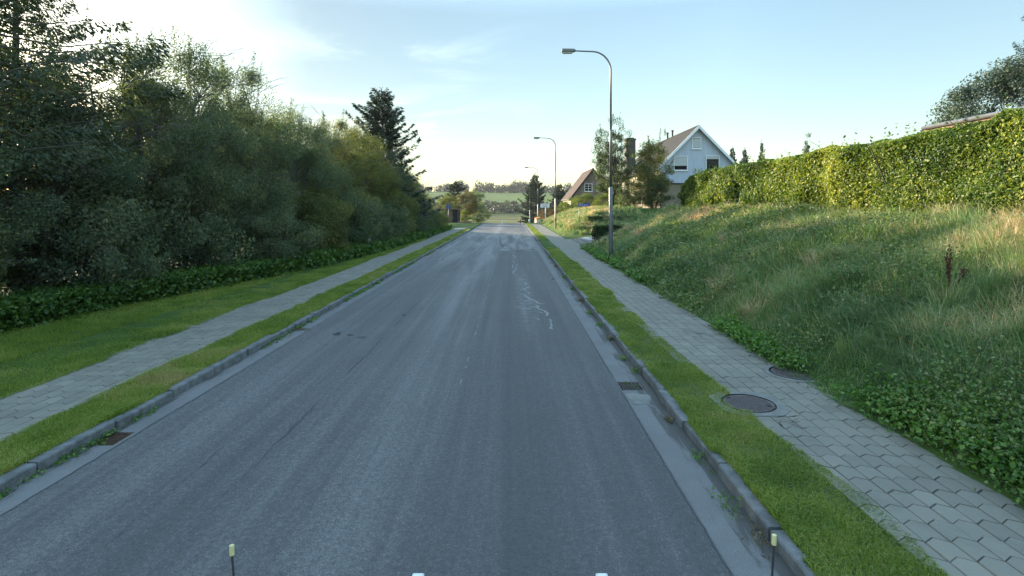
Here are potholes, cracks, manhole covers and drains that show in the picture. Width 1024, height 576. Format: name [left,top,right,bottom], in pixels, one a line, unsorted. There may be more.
manhole cover [763,364,815,383]
manhole cover [709,392,791,417]
drain grate [94,433,133,446]
drain grate [617,382,644,390]
